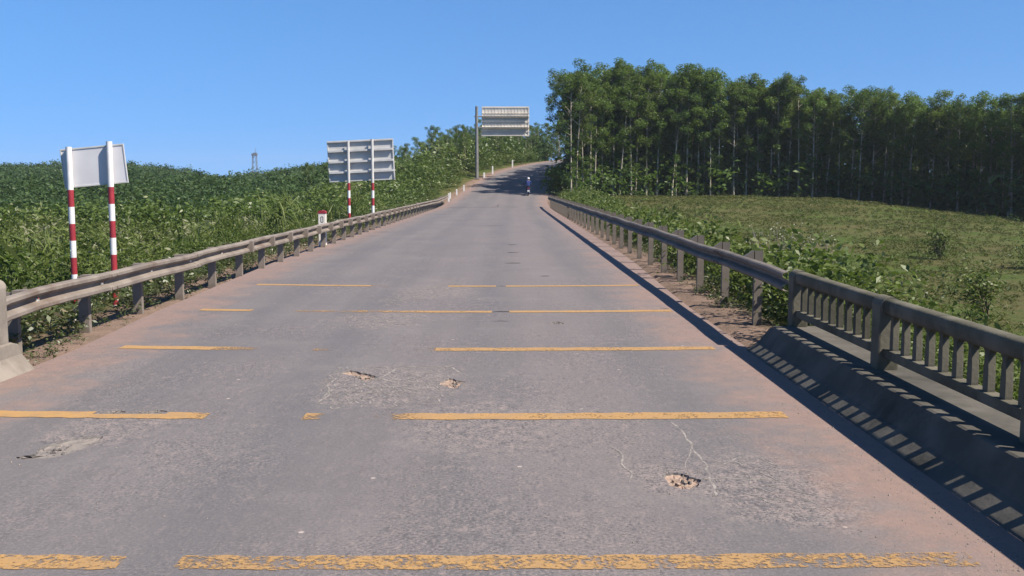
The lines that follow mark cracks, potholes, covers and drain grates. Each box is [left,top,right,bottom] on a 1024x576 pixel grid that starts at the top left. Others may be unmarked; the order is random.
crack [605,447,633,483]
pothole [14,436,103,459]
crack [316,365,469,409]
pothole [340,370,377,381]
pothole [663,472,701,489]
pothole [439,378,465,388]
